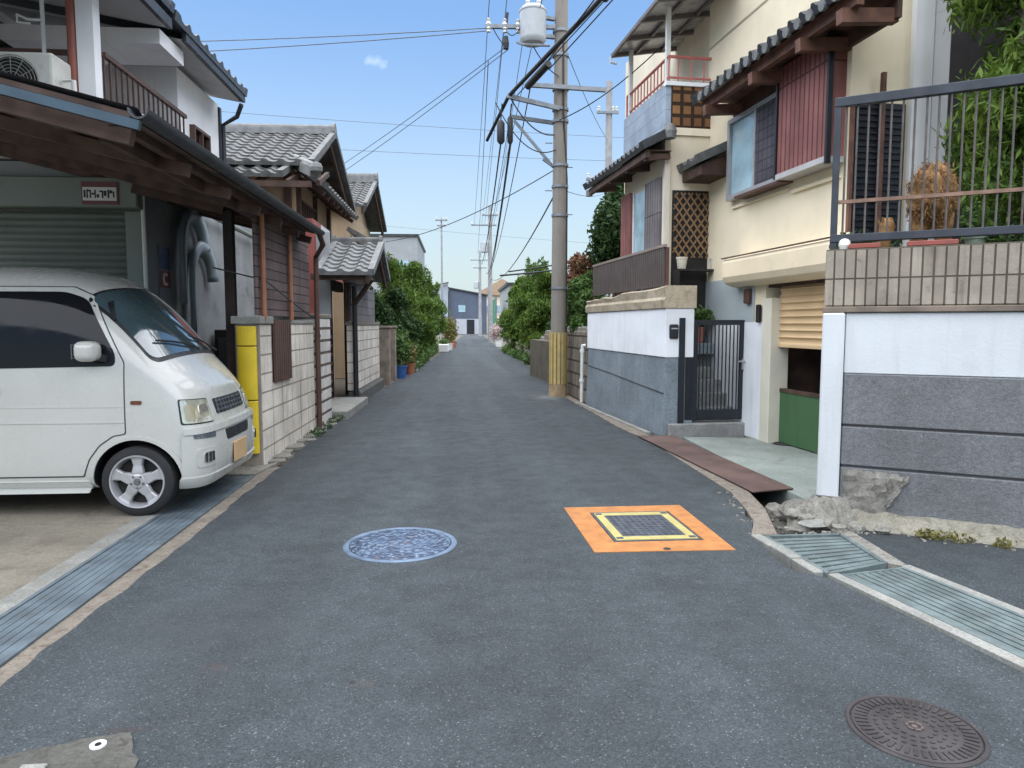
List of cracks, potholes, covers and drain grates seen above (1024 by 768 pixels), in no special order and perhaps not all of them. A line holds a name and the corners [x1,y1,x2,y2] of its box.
drain grate [119,475,254,541]
drain grate [764,533,887,578]
manhole cover [845,695,991,768]
drain grate [842,567,1024,659]
manhole cover [343,527,457,563]
drain grate [0,539,169,668]
